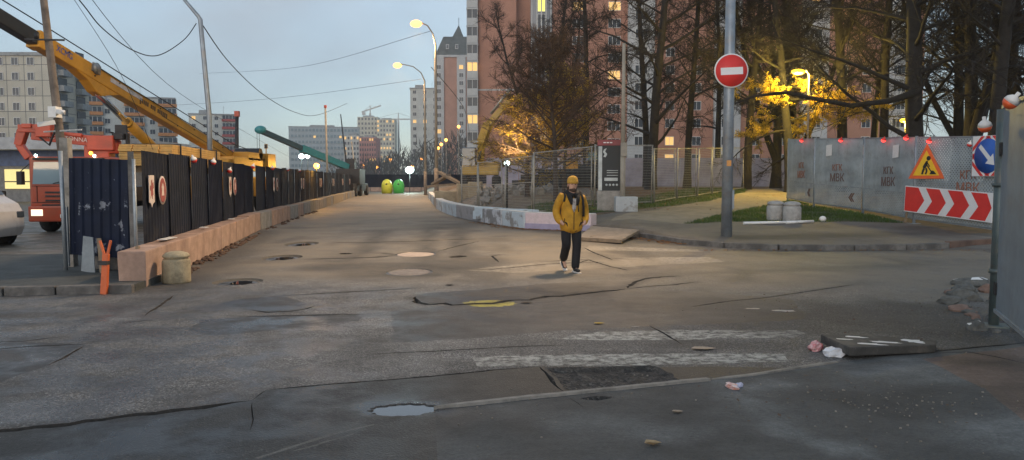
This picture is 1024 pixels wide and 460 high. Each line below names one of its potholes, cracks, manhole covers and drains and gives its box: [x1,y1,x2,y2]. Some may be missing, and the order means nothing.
crack [135,296,173,322]
crack [327,239,693,305]
crack [0,337,105,365]
crack [693,285,848,307]
pothole [368,403,439,416]
